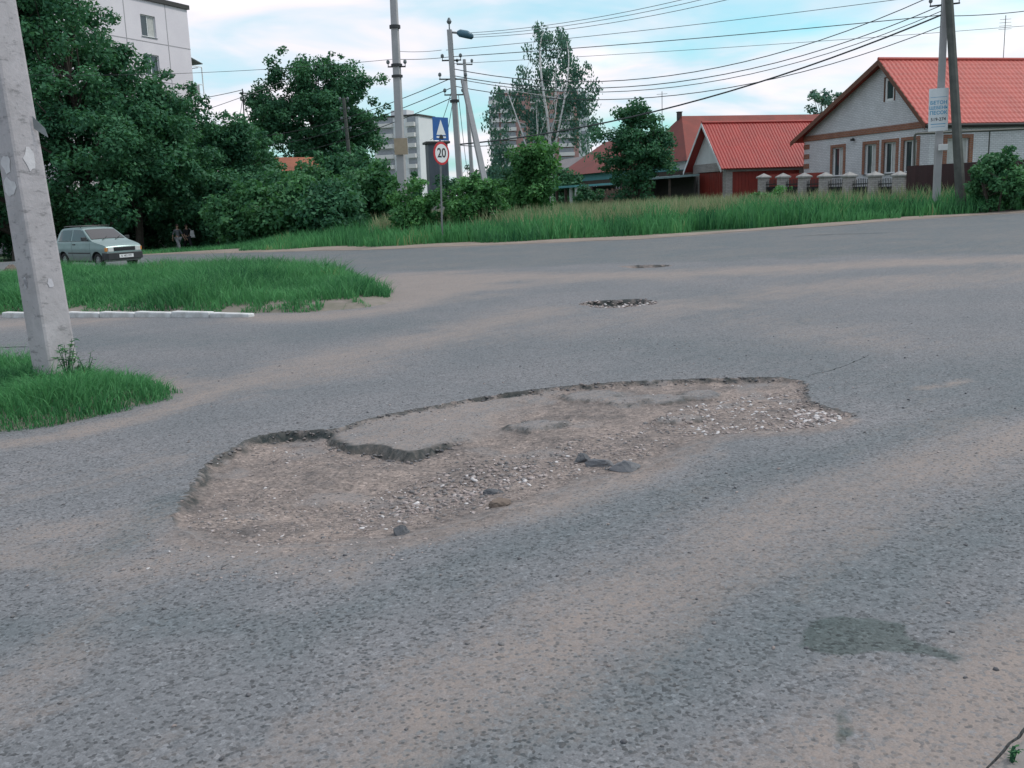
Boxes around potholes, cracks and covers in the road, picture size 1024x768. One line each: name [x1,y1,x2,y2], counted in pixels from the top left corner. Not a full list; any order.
pothole [578,298,657,308]
pothole [138,376,857,587]
